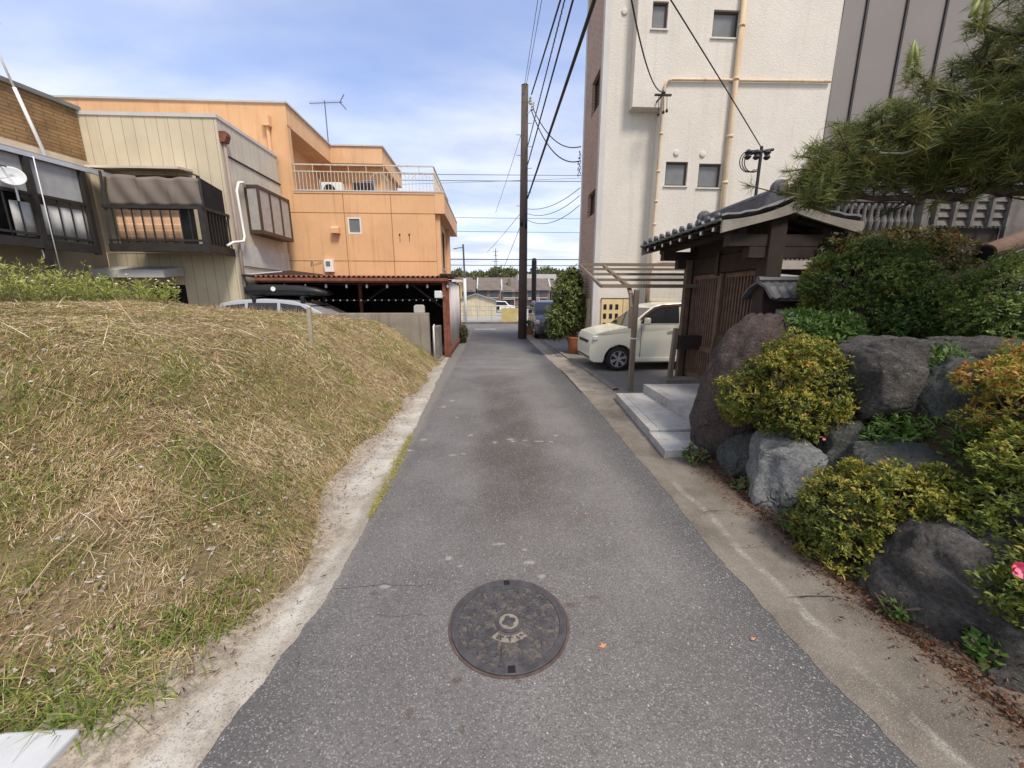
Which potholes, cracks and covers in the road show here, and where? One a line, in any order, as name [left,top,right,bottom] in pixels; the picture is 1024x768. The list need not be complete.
manhole cover [448,579,569,680]
